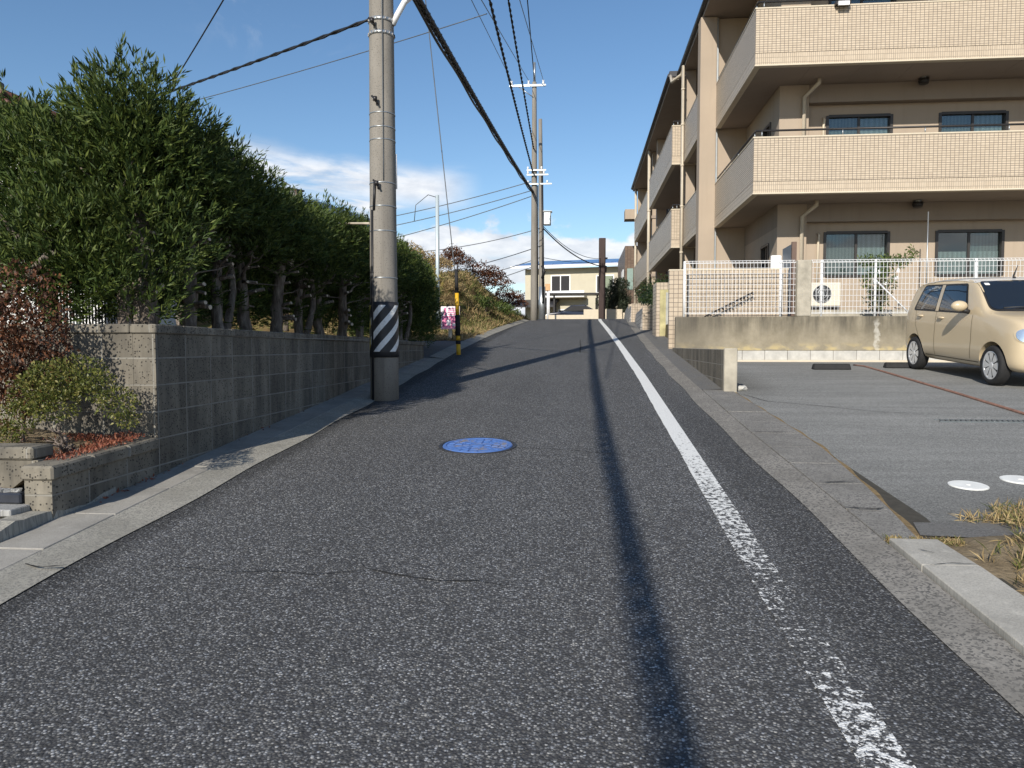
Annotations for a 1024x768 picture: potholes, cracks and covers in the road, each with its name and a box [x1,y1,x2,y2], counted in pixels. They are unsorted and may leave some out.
manhole cover [439,437,517,454]
crack [162,563,515,586]
